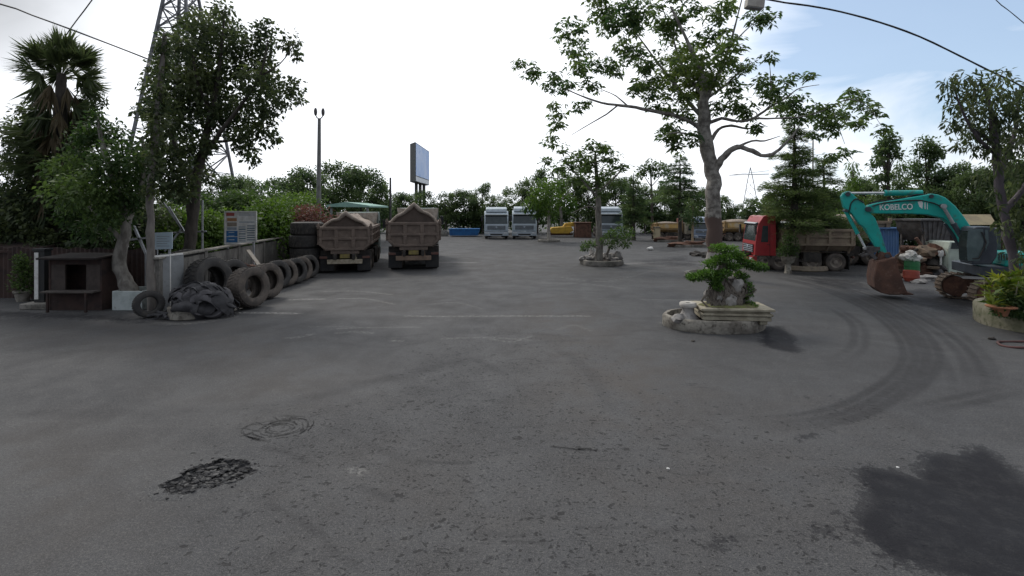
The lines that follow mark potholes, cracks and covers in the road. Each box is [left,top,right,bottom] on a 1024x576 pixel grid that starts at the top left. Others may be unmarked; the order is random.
pothole [143,453,269,501]
